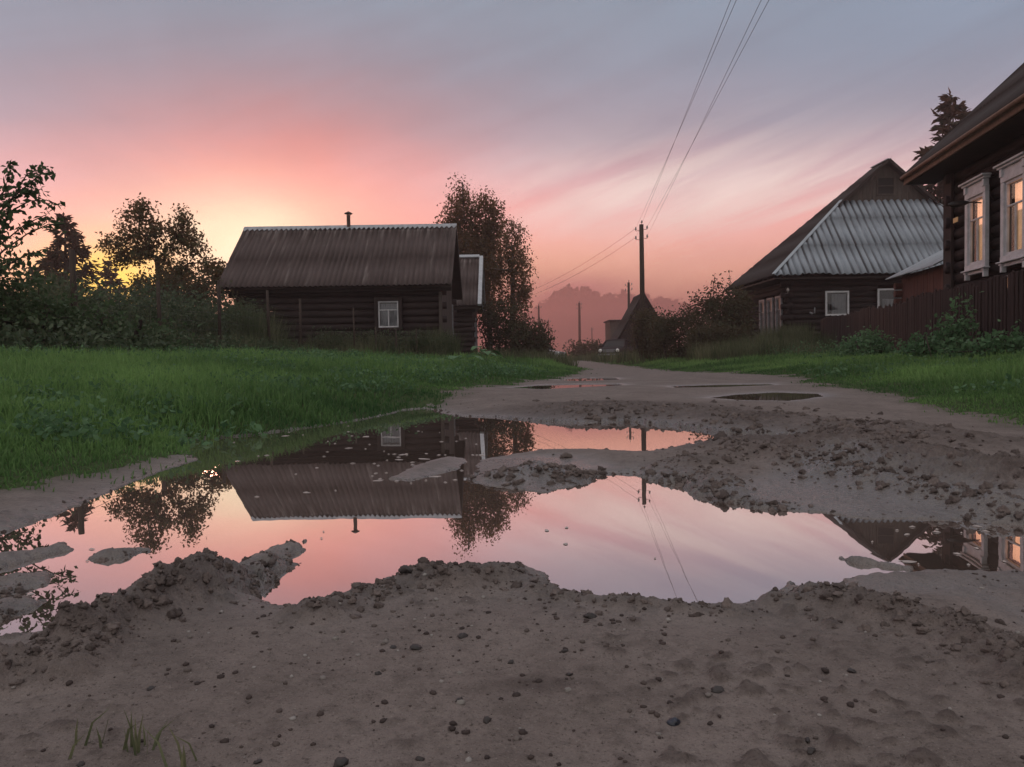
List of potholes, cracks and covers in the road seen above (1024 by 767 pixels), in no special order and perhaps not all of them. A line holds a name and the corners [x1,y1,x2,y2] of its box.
pothole [0,407,1024,637]
pothole [703,391,834,401]
